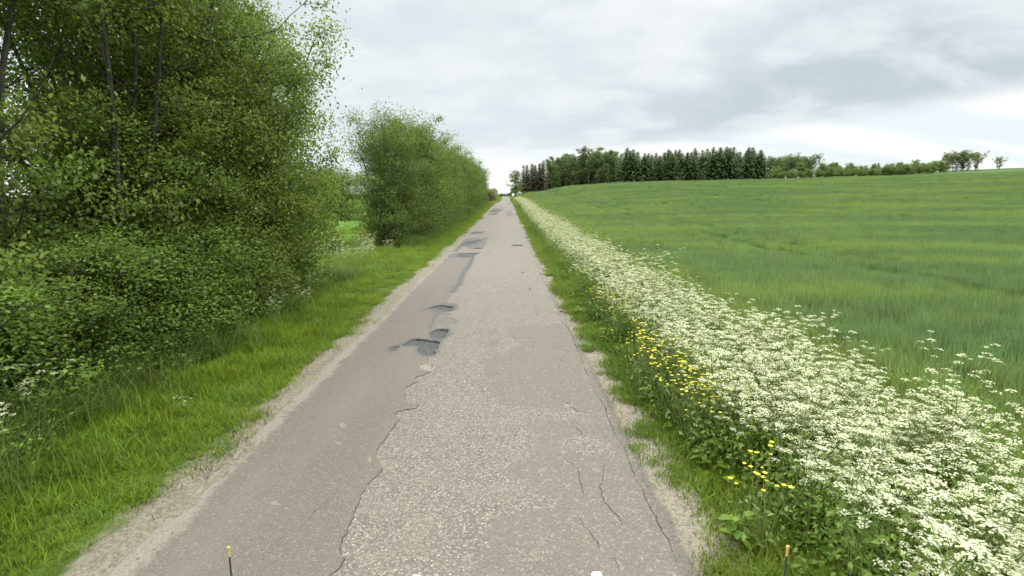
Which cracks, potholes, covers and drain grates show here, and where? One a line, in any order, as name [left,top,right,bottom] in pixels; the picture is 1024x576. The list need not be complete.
crack [529,246,680,571]
pothole [430,329,449,339]
crack [329,358,430,576]
pothole [403,339,440,356]
